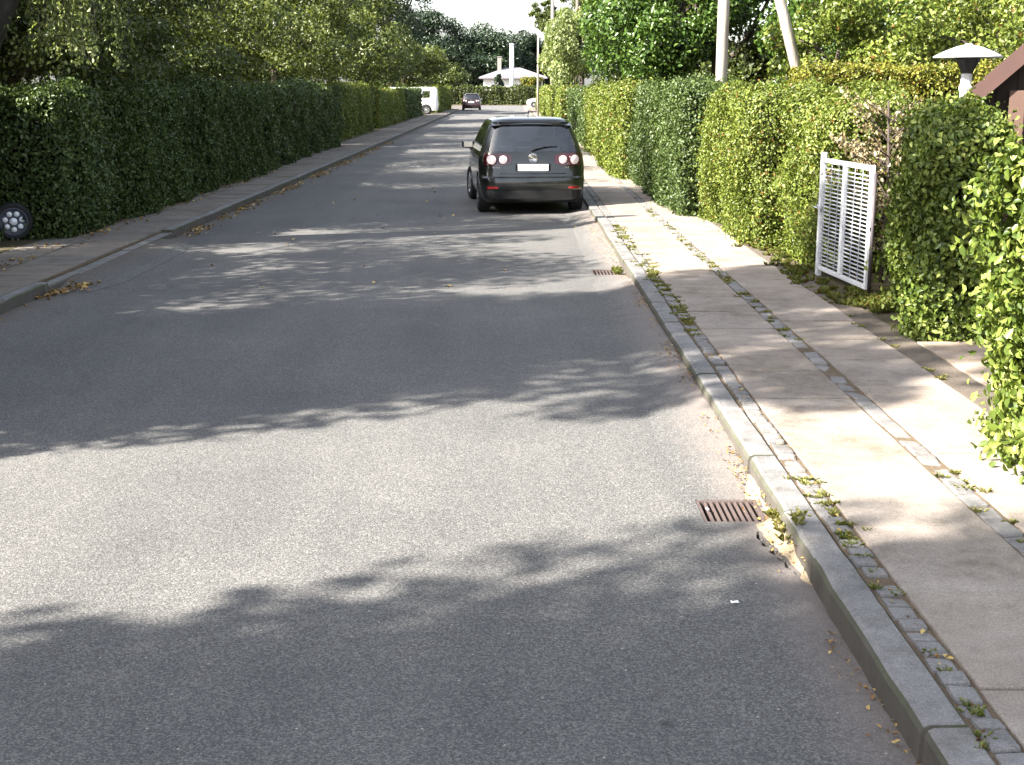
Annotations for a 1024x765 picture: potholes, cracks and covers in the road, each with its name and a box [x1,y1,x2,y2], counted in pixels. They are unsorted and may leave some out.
drain grate [695,500,766,522]
